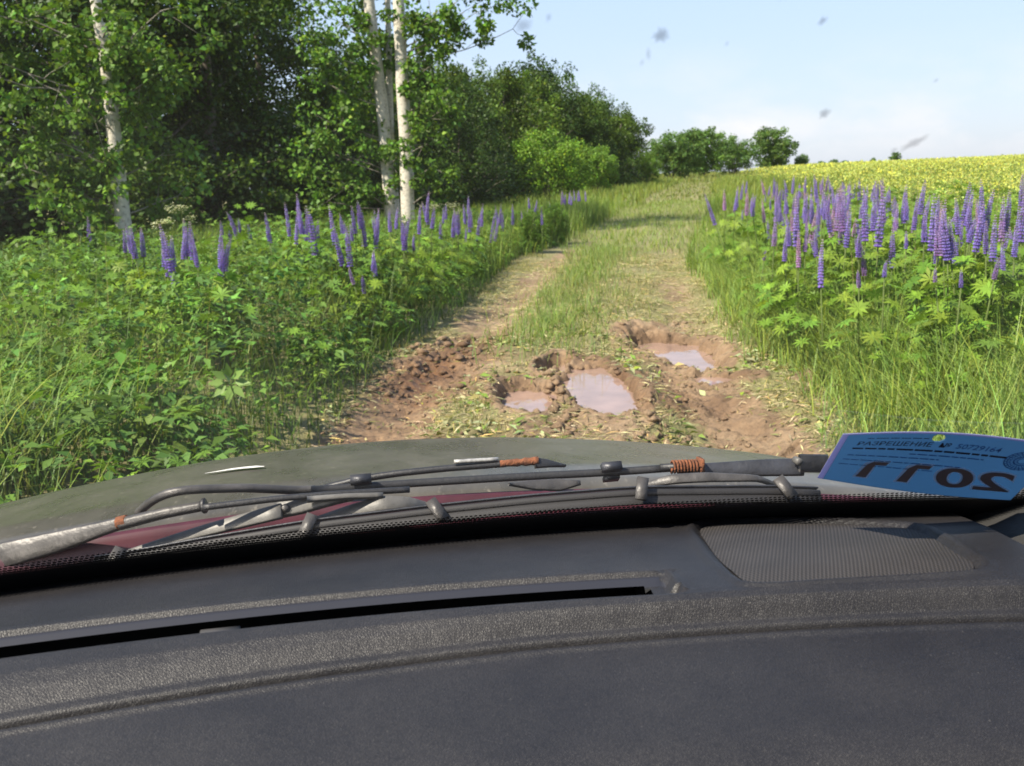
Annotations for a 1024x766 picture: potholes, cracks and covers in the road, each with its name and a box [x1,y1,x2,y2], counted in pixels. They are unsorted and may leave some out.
pothole [557,358,650,419]
pothole [535,350,574,372]
pothole [696,370,760,379]
pothole [617,322,730,374]
pothole [491,377,560,414]
